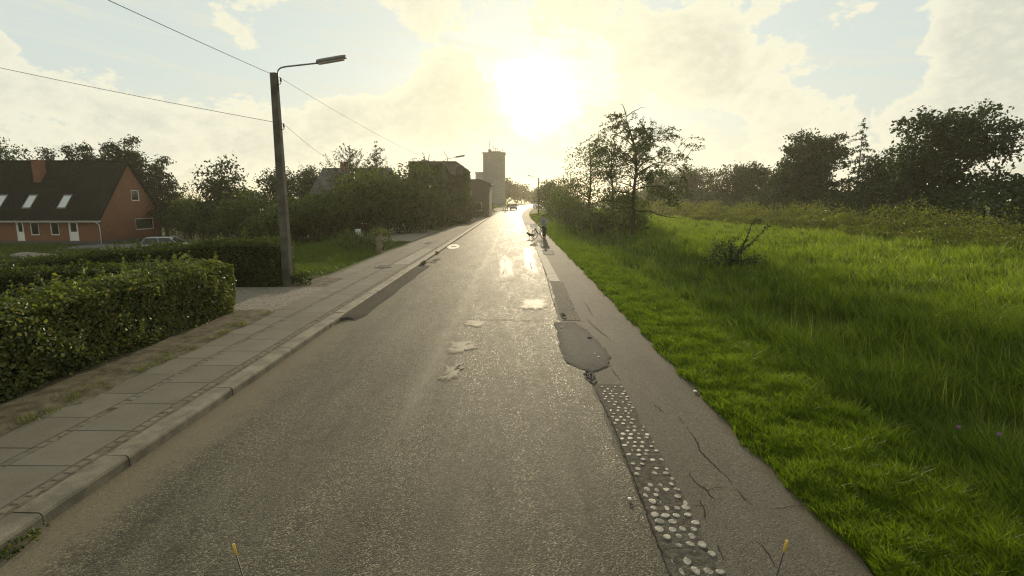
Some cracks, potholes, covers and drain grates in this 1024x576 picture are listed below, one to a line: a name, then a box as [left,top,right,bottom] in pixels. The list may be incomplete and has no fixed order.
crack [658,407,746,520]
